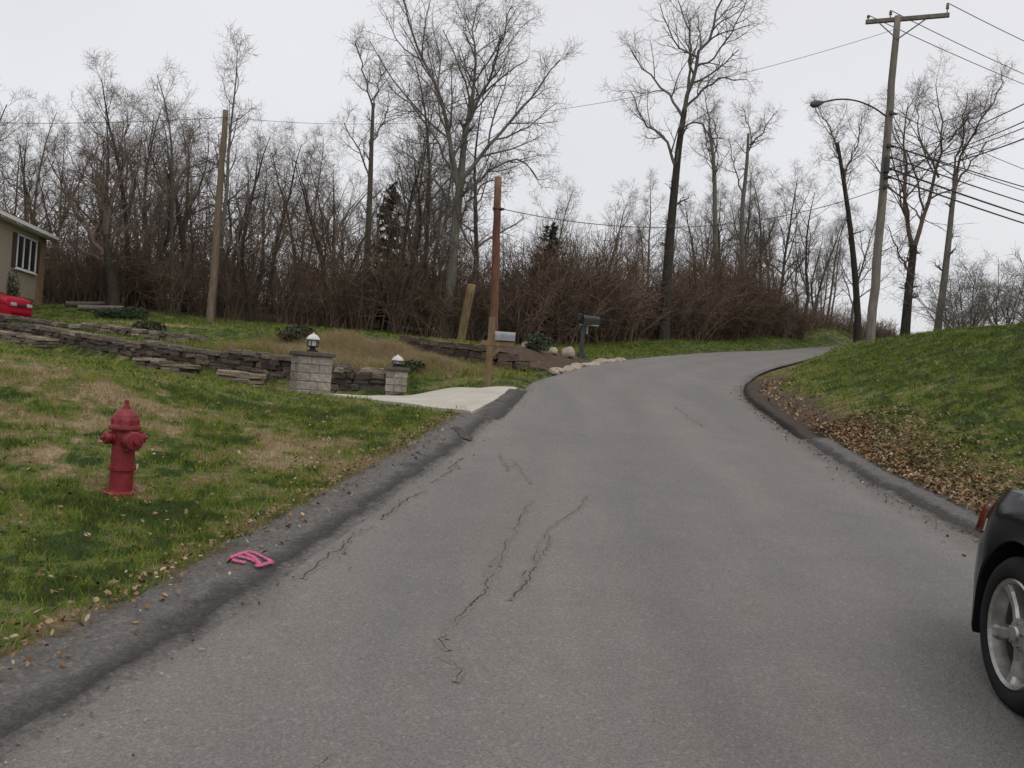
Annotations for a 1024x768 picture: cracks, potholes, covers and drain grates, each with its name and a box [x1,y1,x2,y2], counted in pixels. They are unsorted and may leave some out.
crack [300,453,590,683]
crack [675,407,704,427]
